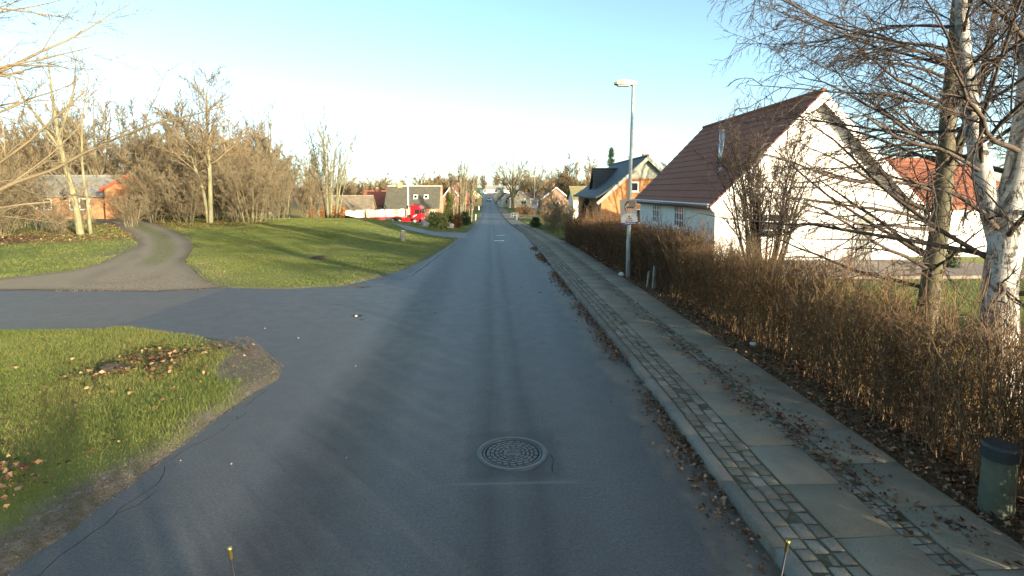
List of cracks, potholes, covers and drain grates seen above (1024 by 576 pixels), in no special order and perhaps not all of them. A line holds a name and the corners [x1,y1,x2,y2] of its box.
manhole cover [477,437,548,471]
crack [39,389,268,576]
